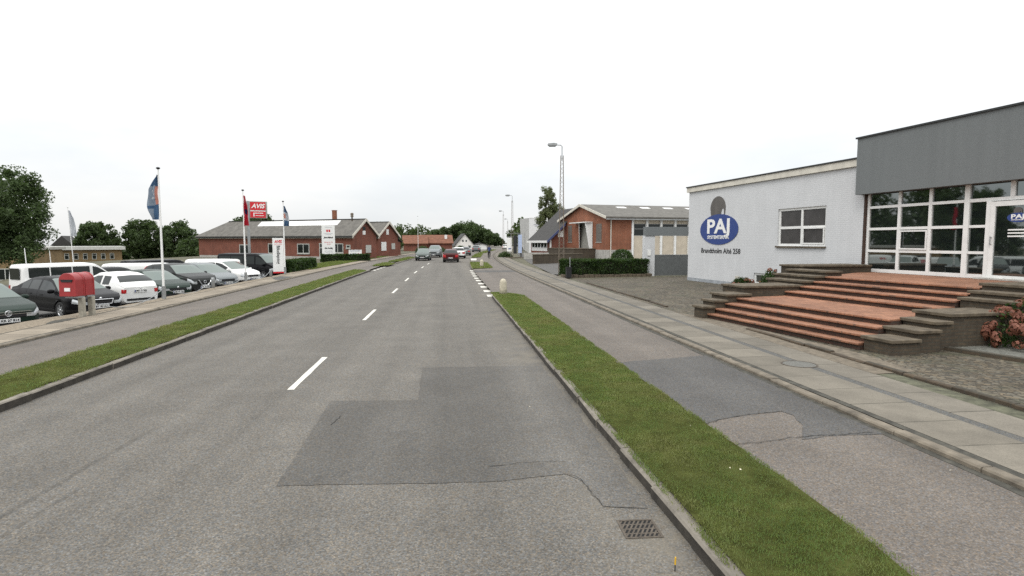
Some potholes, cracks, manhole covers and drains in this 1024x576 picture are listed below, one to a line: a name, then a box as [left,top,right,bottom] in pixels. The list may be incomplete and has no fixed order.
manhole cover [781,360,818,368]
drain grate [616,519,664,539]
